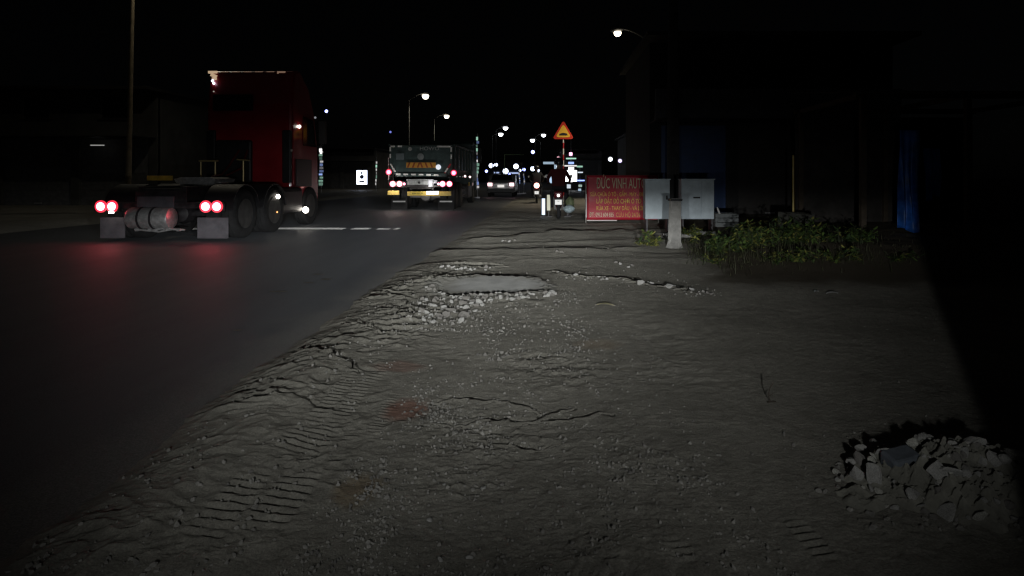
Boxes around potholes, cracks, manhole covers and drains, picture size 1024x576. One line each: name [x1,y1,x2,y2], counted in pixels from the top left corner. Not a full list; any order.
pothole [420,274,558,299]
